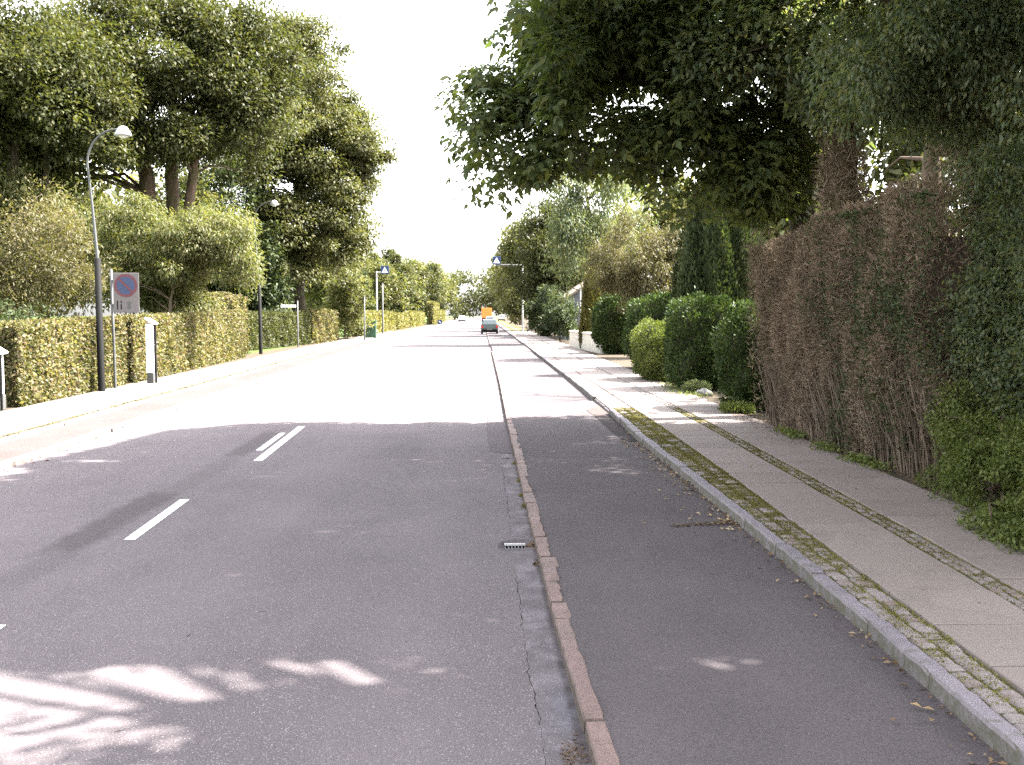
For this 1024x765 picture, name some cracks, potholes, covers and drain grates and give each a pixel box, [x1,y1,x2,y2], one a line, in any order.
drain grate [497,539,534,551]
crack [515,572,563,765]
